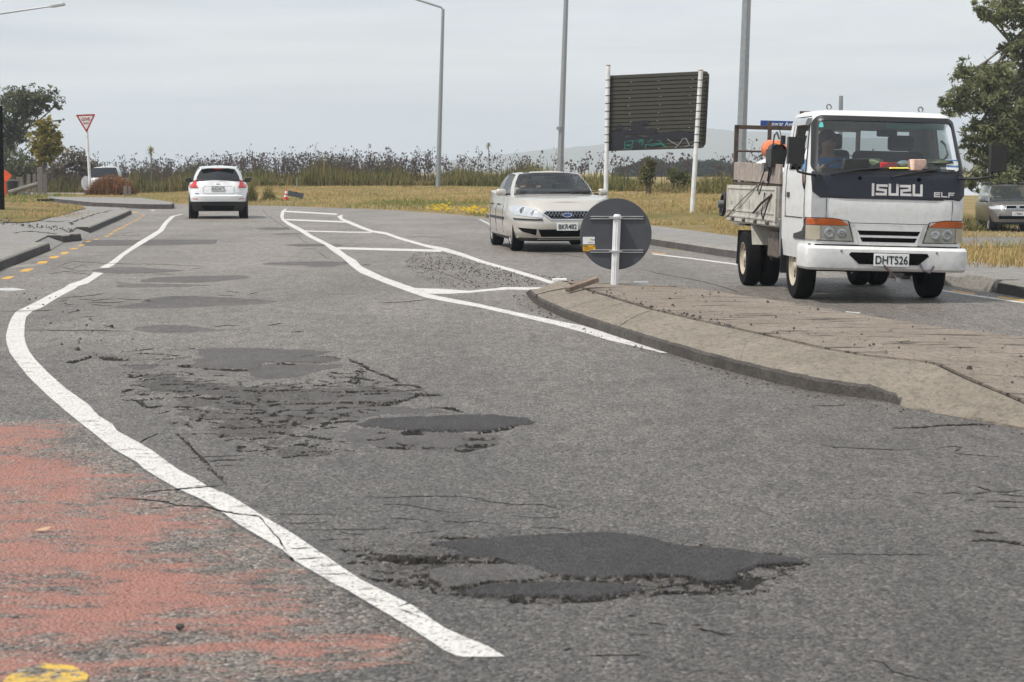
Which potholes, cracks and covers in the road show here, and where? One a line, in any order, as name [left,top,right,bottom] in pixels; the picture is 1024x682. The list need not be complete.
pothole [339,531,815,606]
crack [114,356,574,615]
crack [912,486,1024,508]
pothole [334,414,537,455]
crack [812,405,1000,459]
crack [828,527,1024,556]
